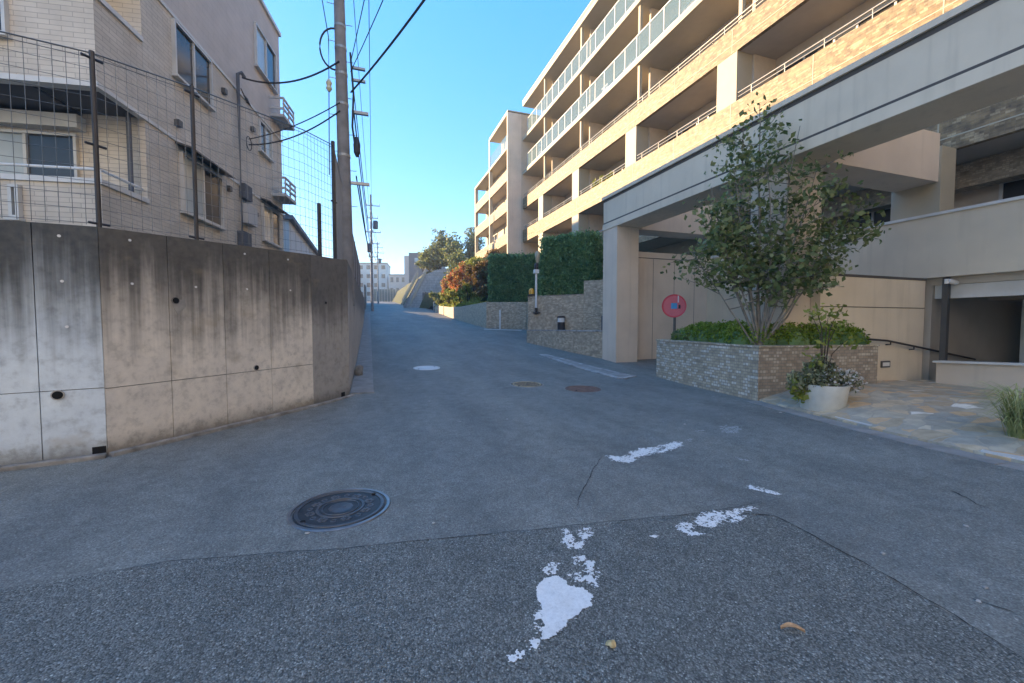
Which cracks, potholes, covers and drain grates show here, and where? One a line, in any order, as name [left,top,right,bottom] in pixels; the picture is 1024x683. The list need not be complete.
manhole cover [286,488,391,532]
